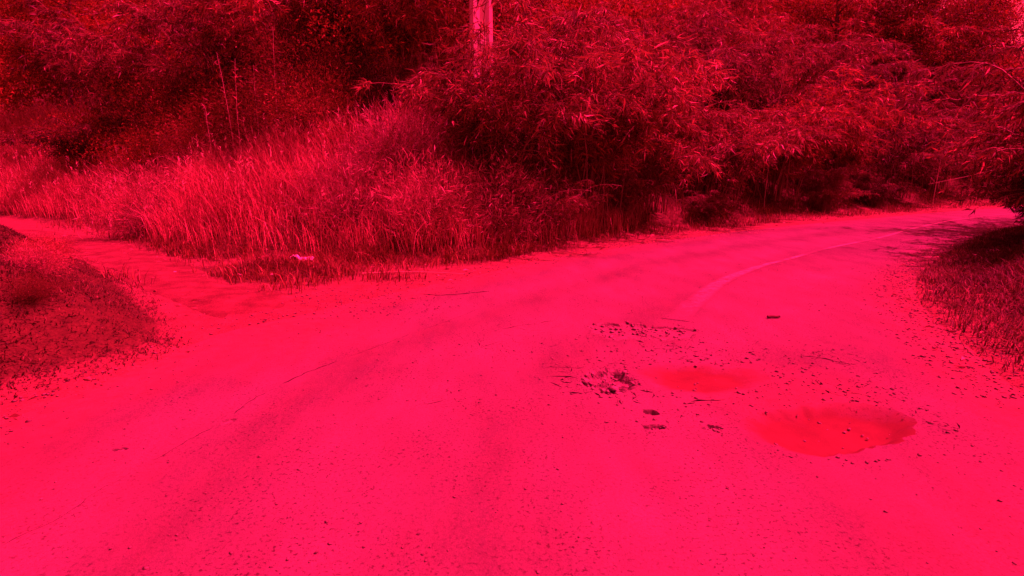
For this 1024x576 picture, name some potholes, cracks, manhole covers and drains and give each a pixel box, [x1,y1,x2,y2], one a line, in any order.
pothole [630,363,771,396]
pothole [580,367,636,395]
pothole [736,402,918,457]
pothole [588,321,700,342]
